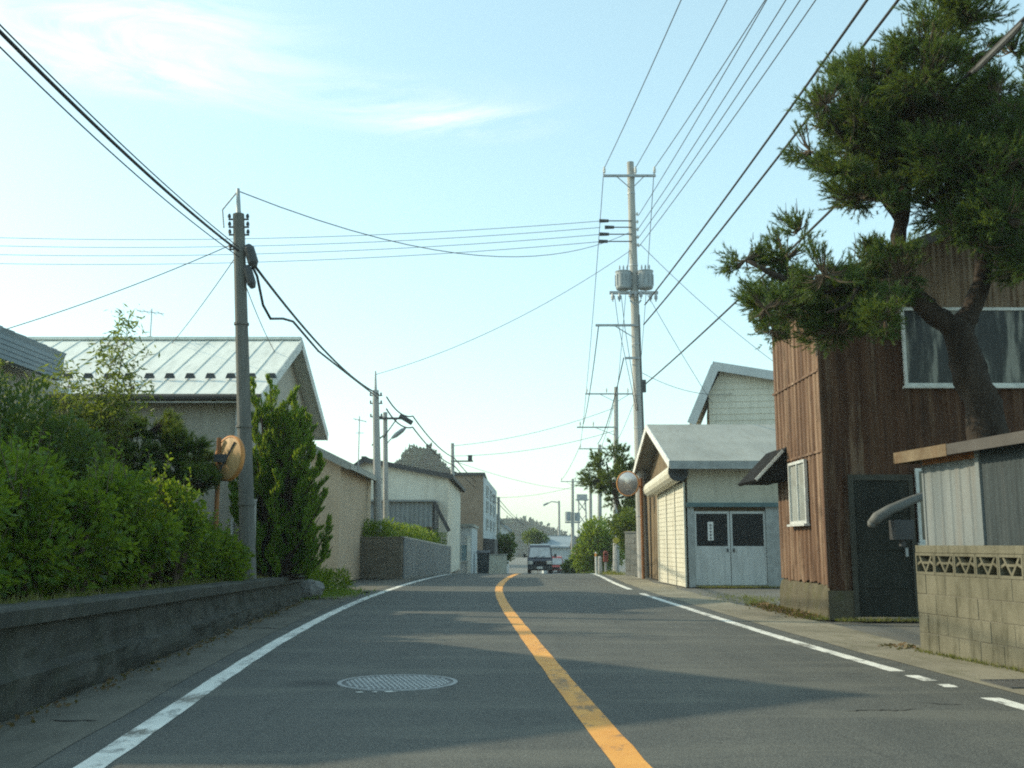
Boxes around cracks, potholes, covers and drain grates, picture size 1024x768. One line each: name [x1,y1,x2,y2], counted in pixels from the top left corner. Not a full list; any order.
manhole cover [337,674,458,691]
